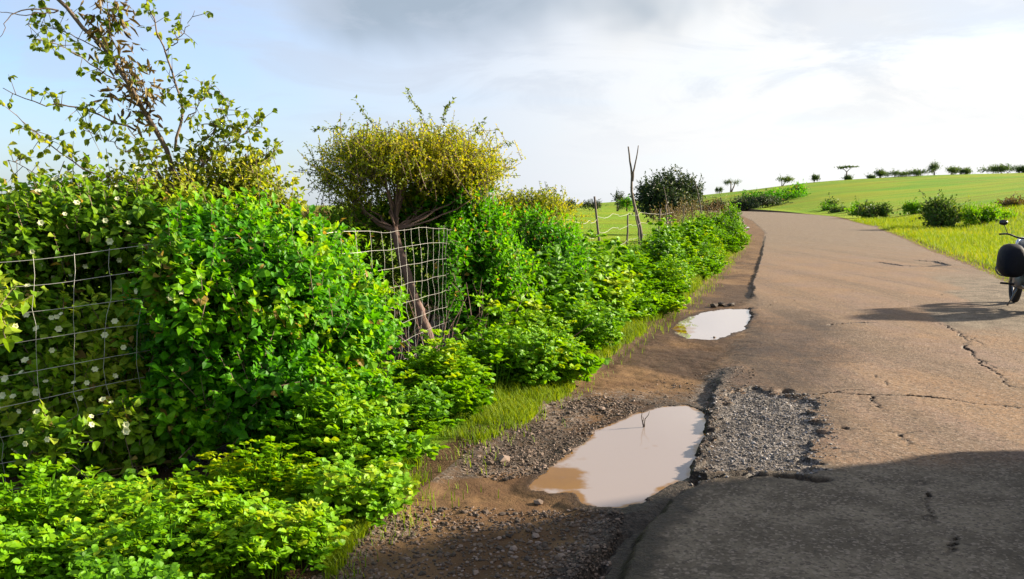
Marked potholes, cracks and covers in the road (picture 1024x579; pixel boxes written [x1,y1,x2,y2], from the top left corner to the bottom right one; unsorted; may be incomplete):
pothole [525,404,711,511]
crack [796,375,1022,409]
pothole [688,385,841,487]
crack [921,481,960,556]
pothole [669,308,755,340]
crack [940,323,1018,388]
